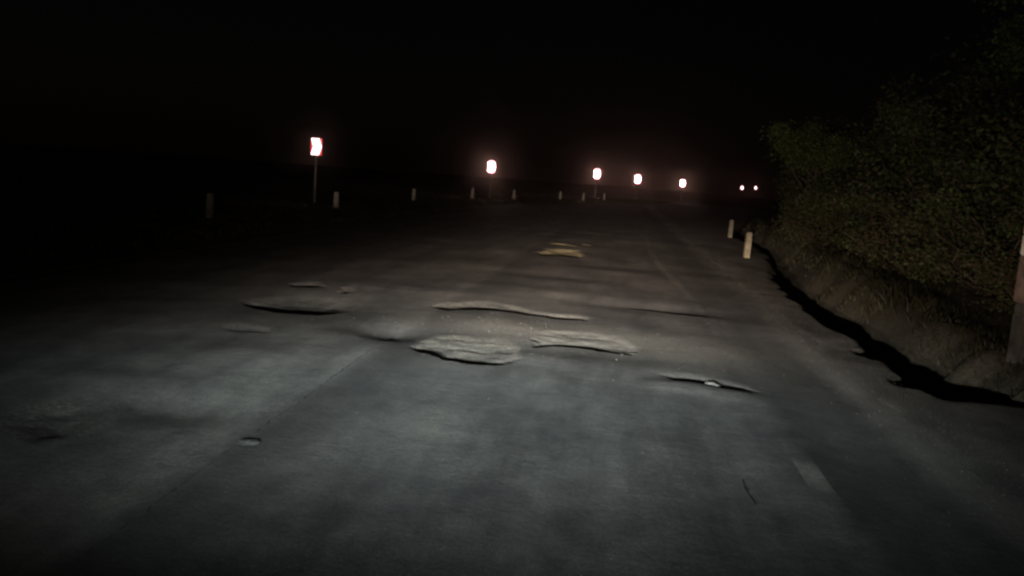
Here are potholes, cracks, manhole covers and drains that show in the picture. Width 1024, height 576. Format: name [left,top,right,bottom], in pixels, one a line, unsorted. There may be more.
pothole [528,329,643,356]
pothole [238,295,364,316]
pothole [407,334,526,366]
pothole [287,280,328,288]
pothole [431,300,595,321]
pothole [218,323,279,333]
crack [742,480,759,505]
pothole [655,371,763,393]
